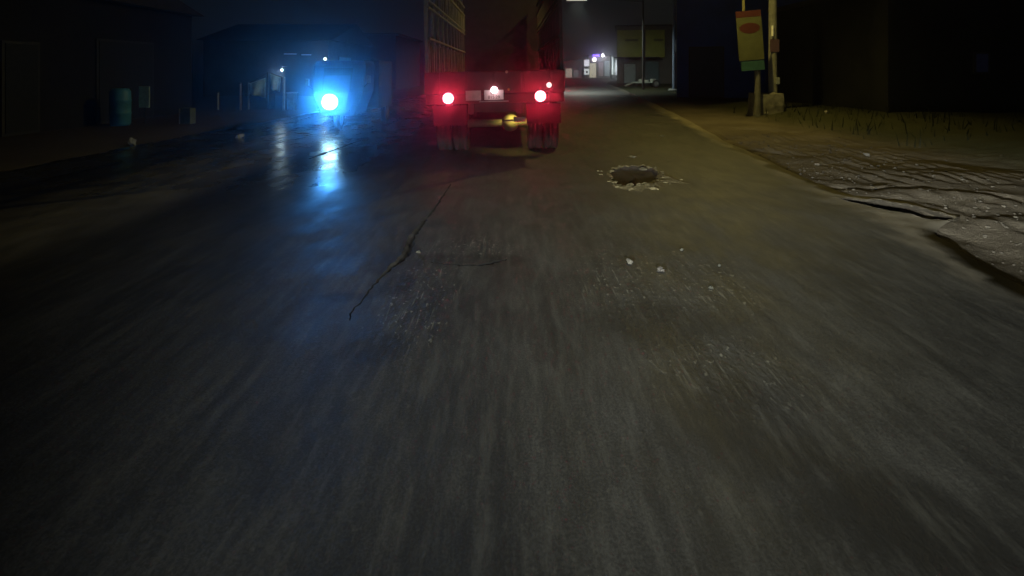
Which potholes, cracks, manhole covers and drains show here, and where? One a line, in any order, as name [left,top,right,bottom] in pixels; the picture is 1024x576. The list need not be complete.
crack [349,184,507,320]
pothole [597,164,690,192]
